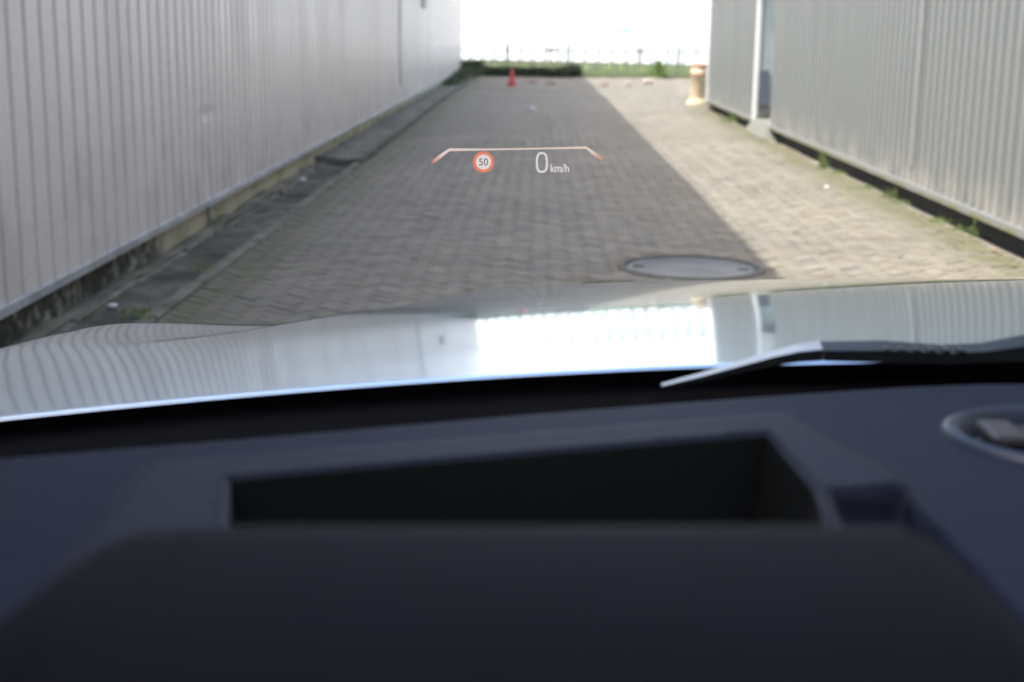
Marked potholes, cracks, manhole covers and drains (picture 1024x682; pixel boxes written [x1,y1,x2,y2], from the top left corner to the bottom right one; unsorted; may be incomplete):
manhole cover [617,254,766,280]
